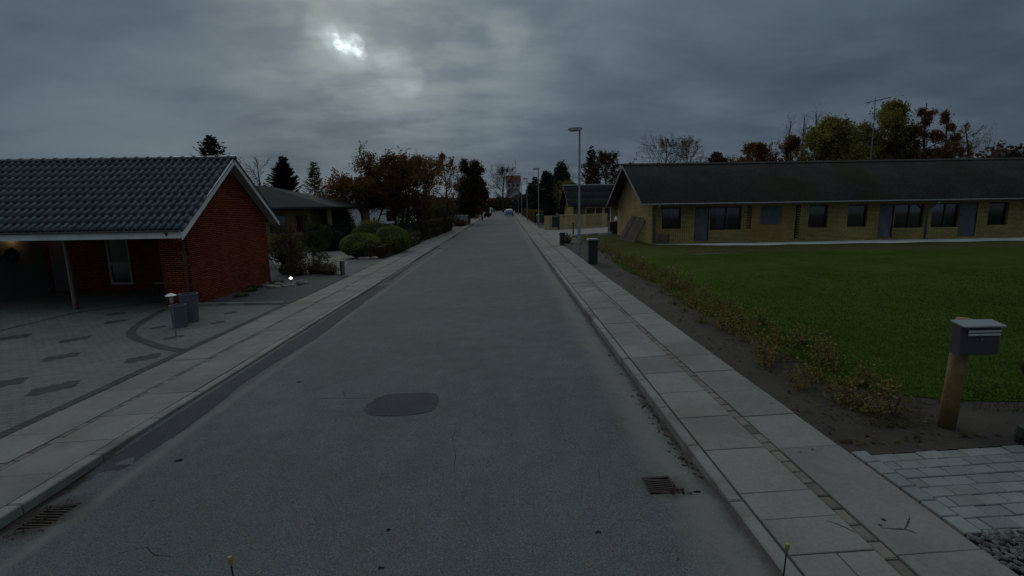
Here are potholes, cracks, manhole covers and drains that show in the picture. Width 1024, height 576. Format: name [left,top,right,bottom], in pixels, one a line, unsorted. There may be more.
drain grate [640,476,692,495]
drain grate [3,498,81,540]
